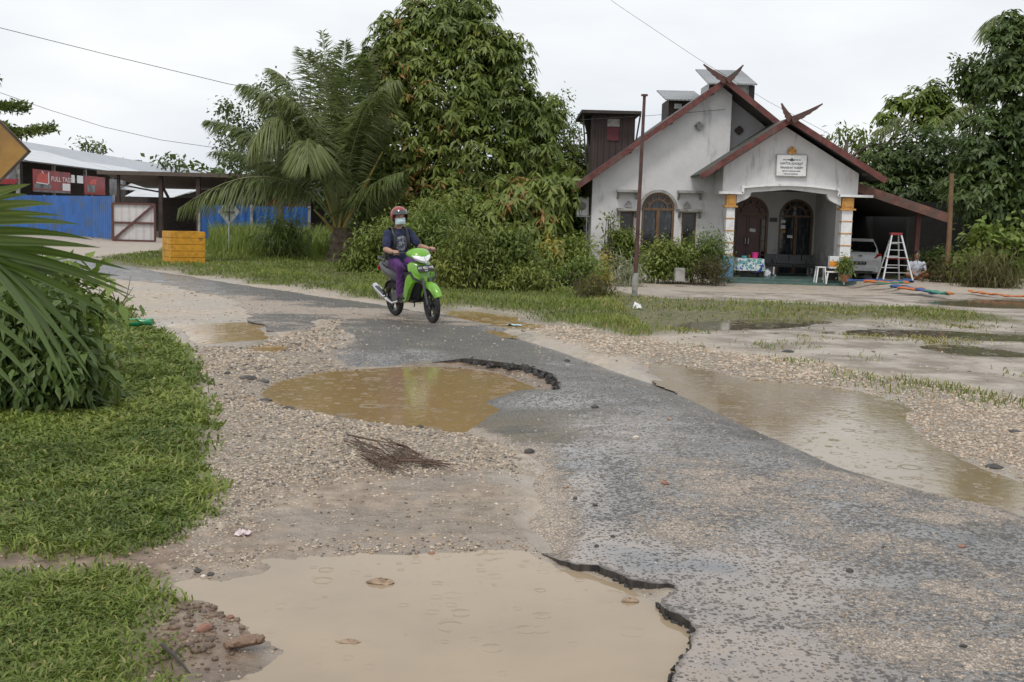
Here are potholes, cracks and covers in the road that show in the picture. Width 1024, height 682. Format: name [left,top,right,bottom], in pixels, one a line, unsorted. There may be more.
pothole [153,319,304,348]
pothole [126,532,692,682]
pothole [239,357,561,435]
